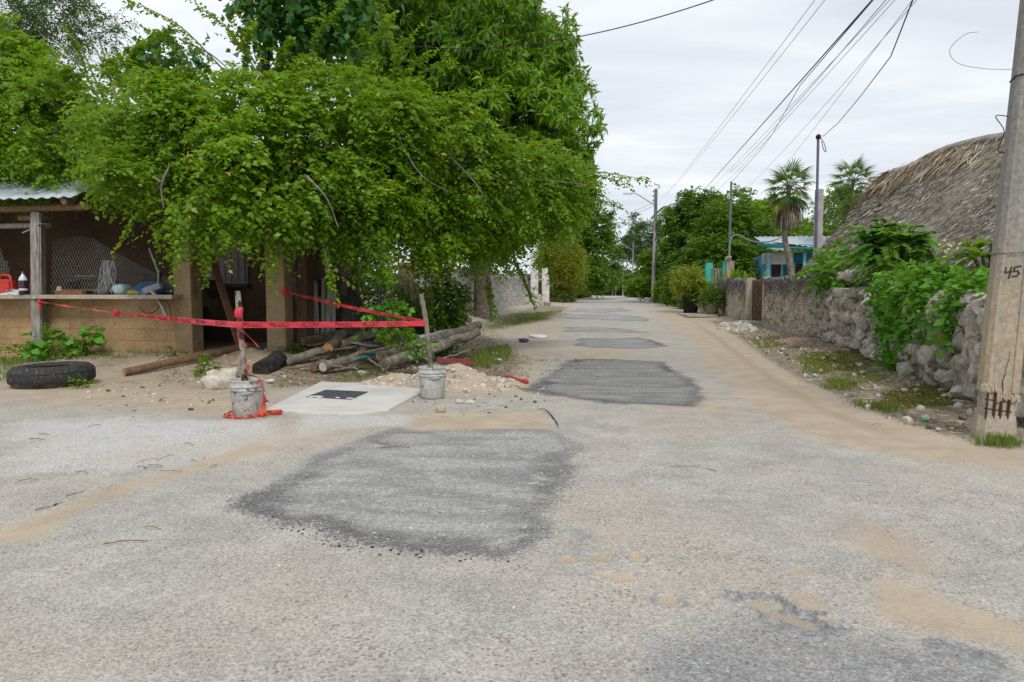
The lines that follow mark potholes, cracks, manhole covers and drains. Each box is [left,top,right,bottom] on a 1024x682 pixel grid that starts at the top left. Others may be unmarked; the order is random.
manhole cover [307,390,368,400]
